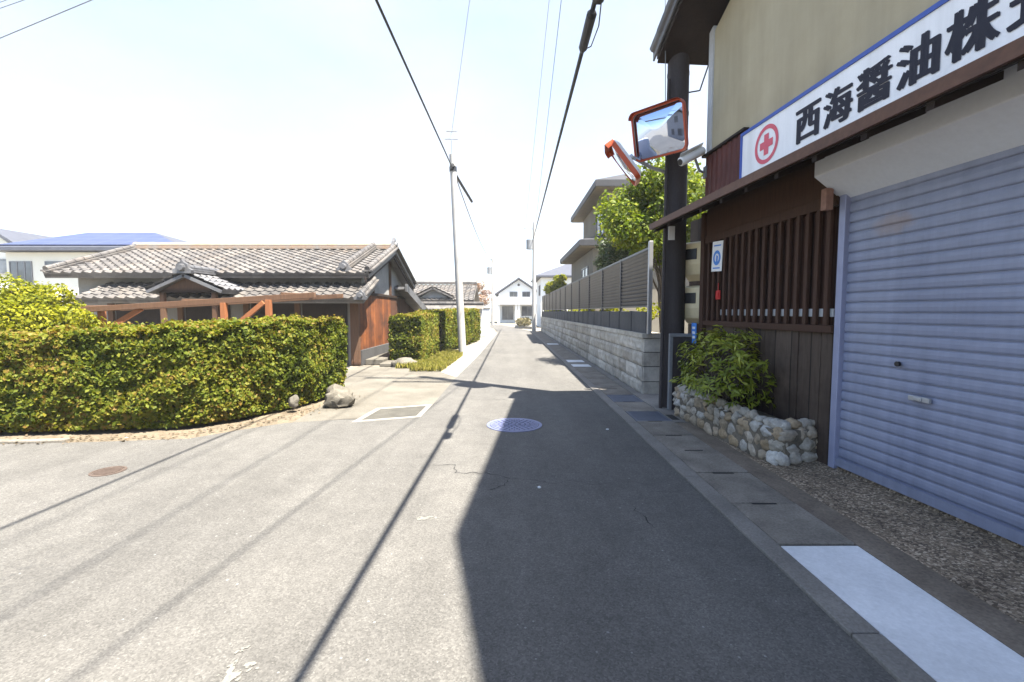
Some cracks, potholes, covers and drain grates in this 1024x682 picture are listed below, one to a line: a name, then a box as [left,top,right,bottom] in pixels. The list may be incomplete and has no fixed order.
crack [445,464,611,490]
utility cover [88,466,127,477]
manhole cover [487,418,542,432]
